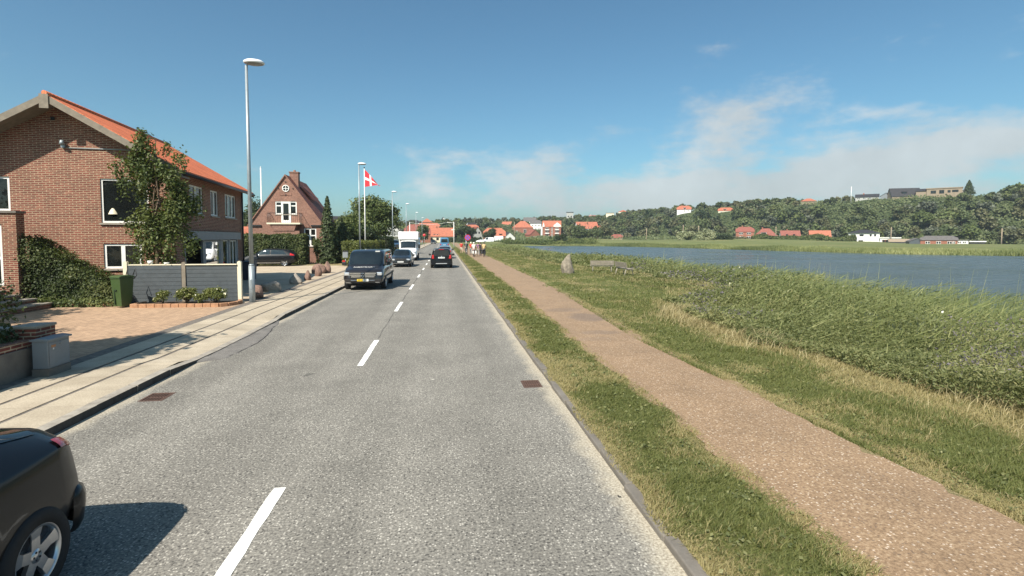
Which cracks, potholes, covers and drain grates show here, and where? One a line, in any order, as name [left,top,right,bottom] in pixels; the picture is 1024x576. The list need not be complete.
drain grate [137,392,176,402]
drain grate [521,379,550,388]
